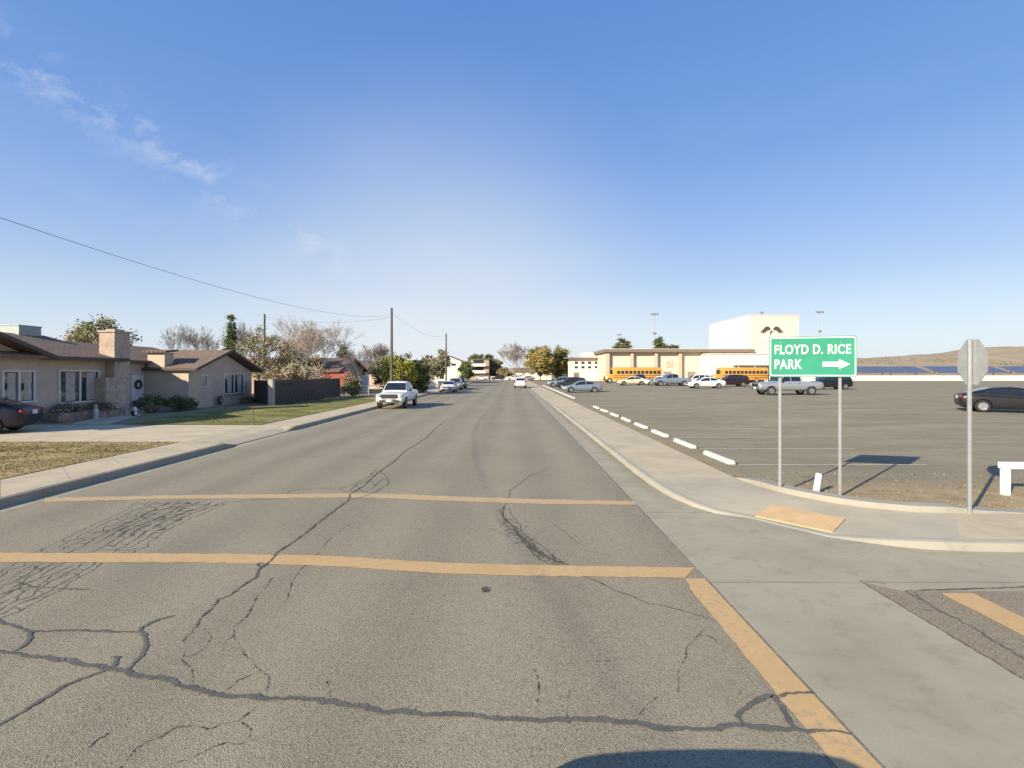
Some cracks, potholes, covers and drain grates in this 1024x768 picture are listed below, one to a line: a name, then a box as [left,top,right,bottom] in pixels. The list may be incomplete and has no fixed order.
crack [492,469,718,693]
crack [0,501,227,618]
crack [182,519,362,693]
crack [119,707,295,768]
